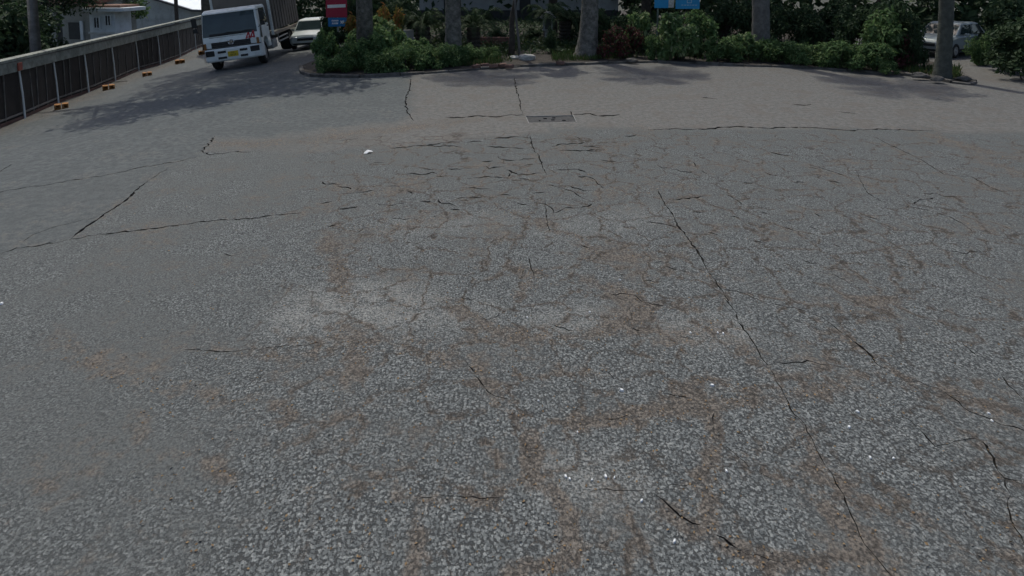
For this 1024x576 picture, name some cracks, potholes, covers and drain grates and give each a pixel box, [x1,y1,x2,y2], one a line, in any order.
crack [184,254,318,352]
crack [321,135,1024,576]
crack [0,169,295,254]
